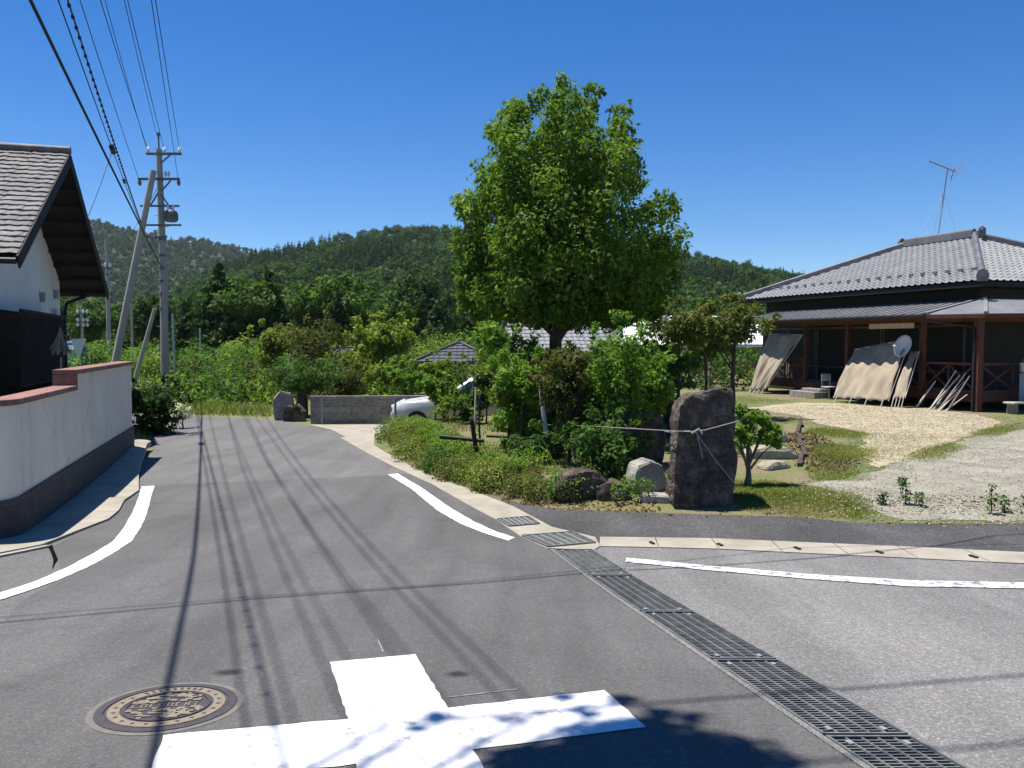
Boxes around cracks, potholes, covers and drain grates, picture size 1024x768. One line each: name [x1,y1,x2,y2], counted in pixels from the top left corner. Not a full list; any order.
drain grate [826,735,969,768]
manhole cover [85,682,244,736]
drain grate [522,531,596,547]
drain grate [497,516,540,527]
drain grate [713,659,907,736]
drain grate [589,575,693,612]
drain grate [554,549,632,575]
drain grate [641,611,776,660]
